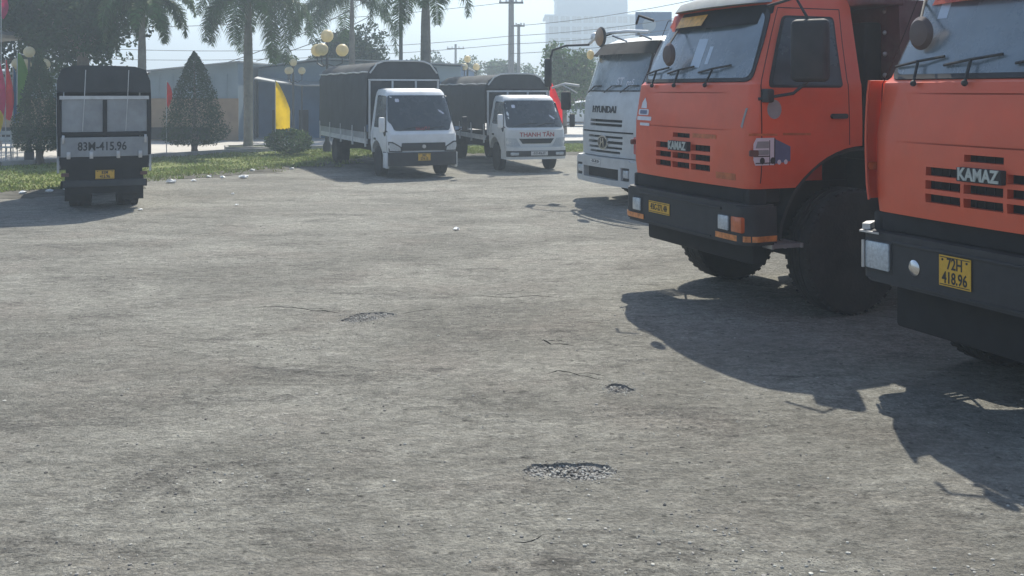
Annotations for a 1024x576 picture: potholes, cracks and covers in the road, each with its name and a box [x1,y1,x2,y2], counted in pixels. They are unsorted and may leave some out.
pothole [599,380,637,396]
pothole [516,459,624,485]
pothole [337,311,397,323]
